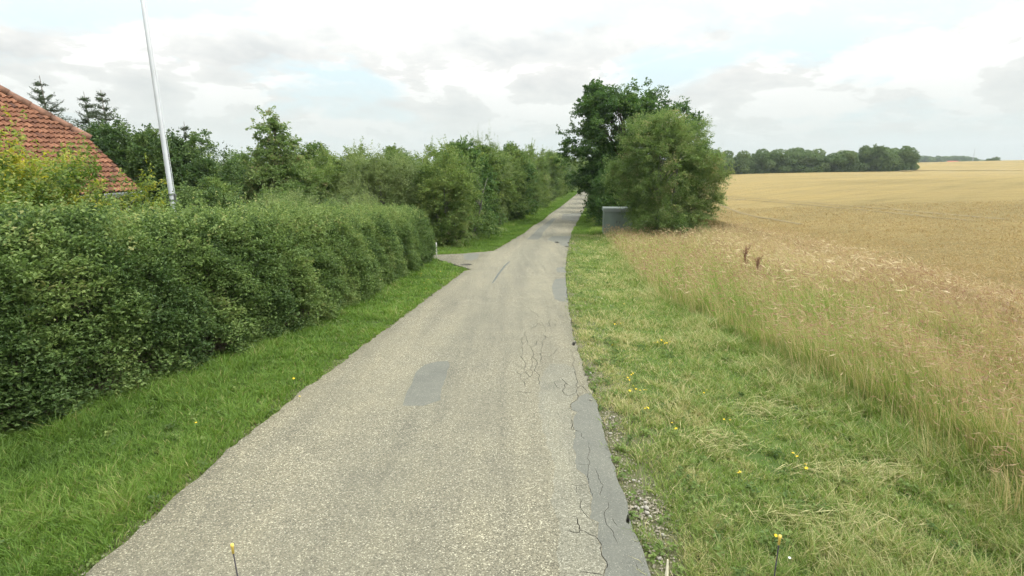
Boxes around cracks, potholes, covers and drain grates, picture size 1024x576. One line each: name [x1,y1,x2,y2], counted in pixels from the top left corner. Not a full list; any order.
crack [517,308,635,575]
